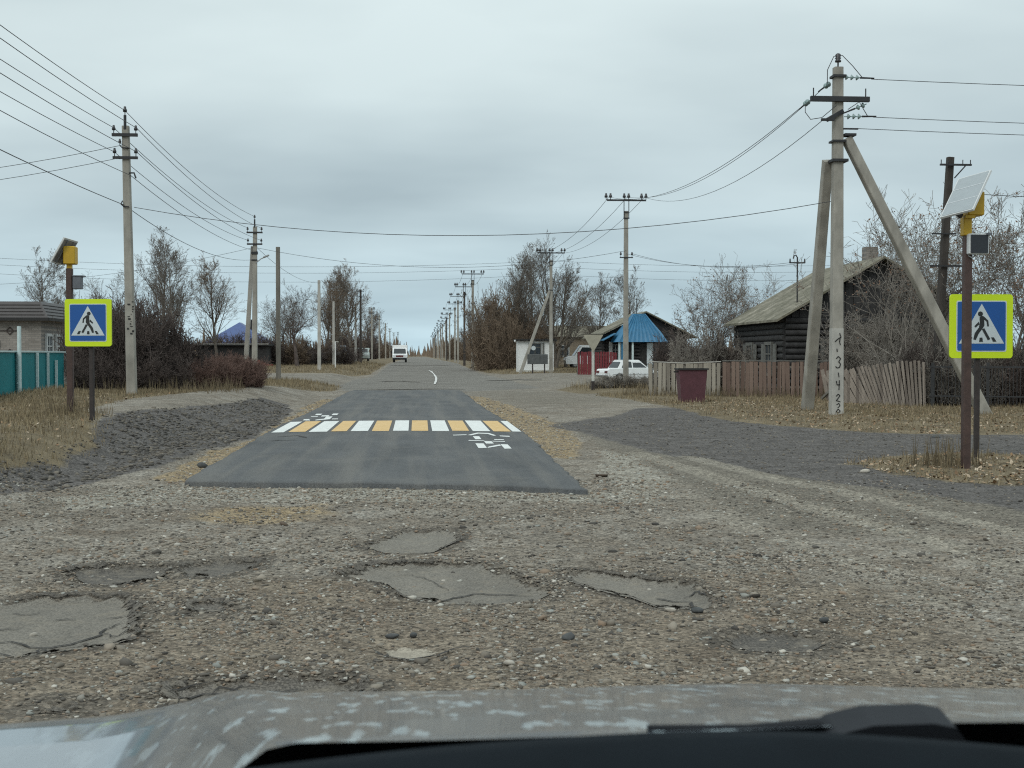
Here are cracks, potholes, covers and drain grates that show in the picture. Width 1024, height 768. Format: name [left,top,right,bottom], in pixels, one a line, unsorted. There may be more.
crack [394,574,530,601]
